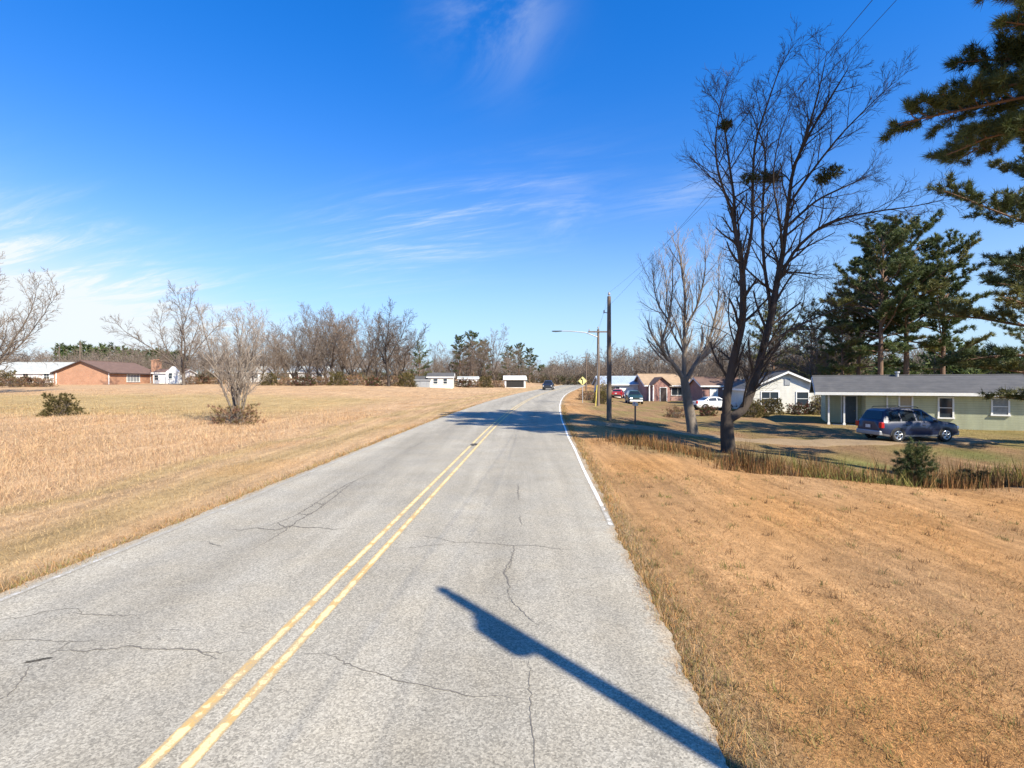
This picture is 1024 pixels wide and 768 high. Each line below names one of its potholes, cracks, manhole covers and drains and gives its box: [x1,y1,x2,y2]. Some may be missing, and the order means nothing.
crack [0,630,237,699]
crack [305,653,509,698]
crack [527,662,536,768]
crack [396,536,570,625]
crack [209,474,369,550]
crack [7,608,140,619]
